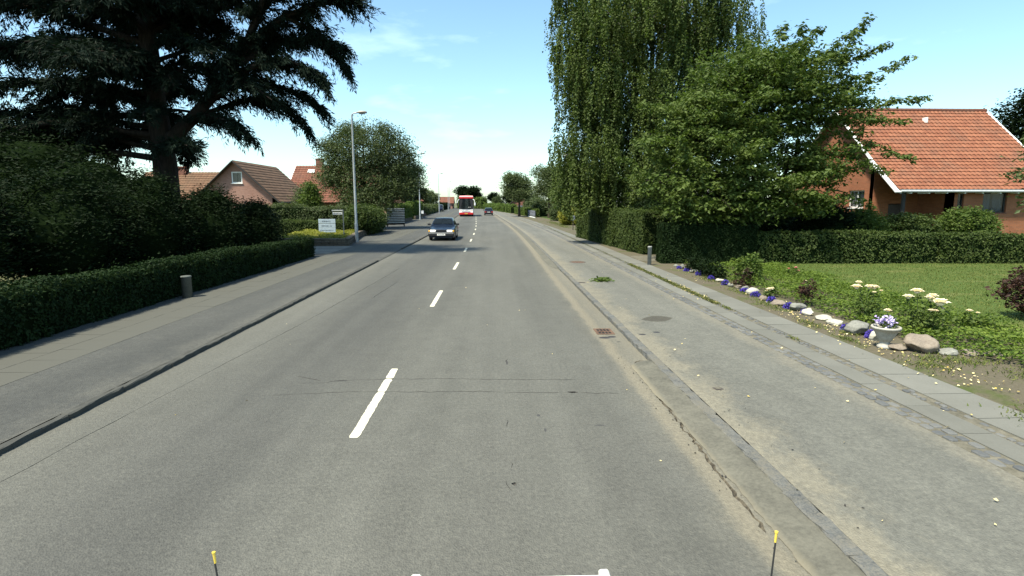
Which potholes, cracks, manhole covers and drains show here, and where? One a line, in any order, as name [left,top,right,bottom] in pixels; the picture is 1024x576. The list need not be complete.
crack [287,376,617,395]
